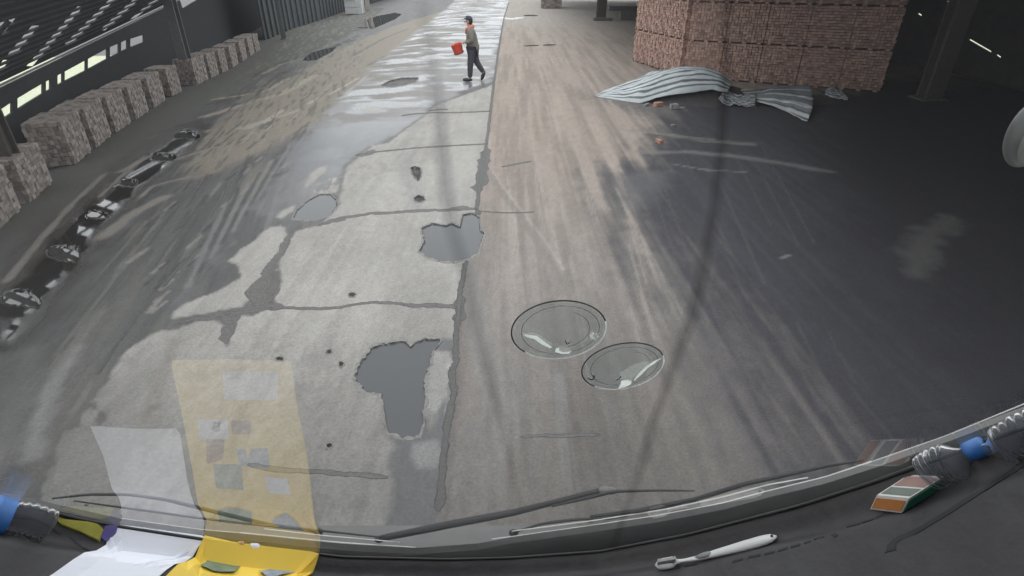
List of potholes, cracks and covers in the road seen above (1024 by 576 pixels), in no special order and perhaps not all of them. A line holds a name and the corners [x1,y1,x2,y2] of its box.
pothole [351,336,444,440]
pothole [410,166,423,181]
pothole [417,212,487,263]
pothole [291,193,340,222]
crack [97,2,532,512]
